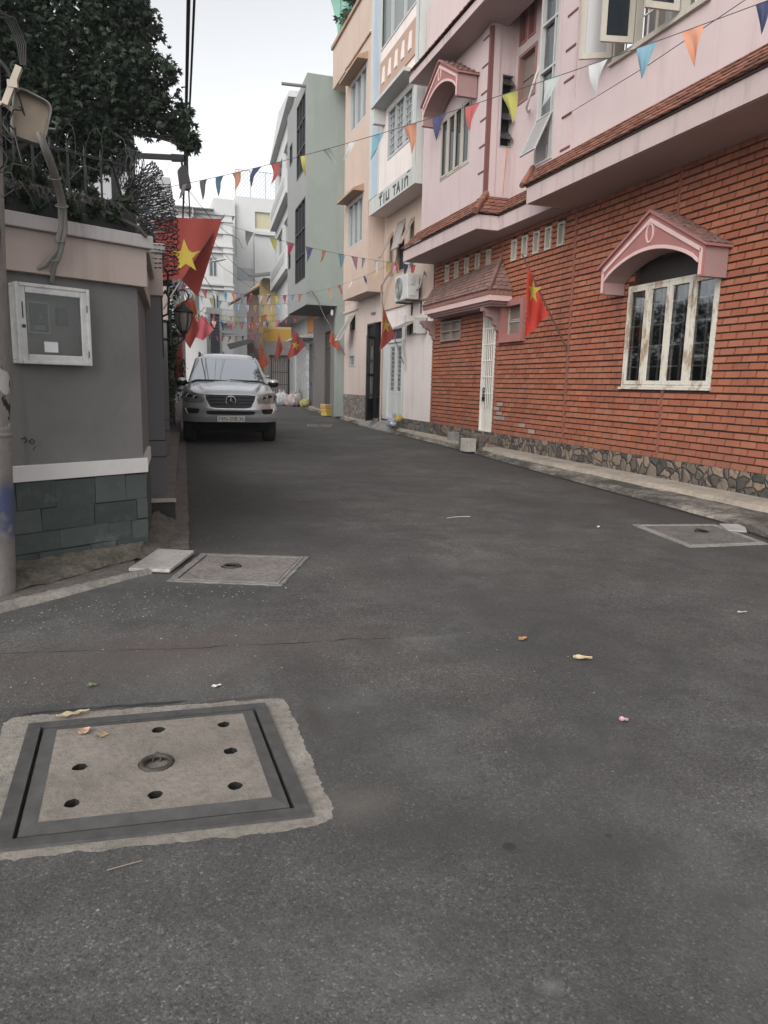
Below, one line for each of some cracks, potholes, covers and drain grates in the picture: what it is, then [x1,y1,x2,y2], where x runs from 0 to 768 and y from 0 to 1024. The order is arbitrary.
manhole cover [167,553,309,586]
manhole cover [0,698,334,861]
manhole cover [633,524,768,548]
